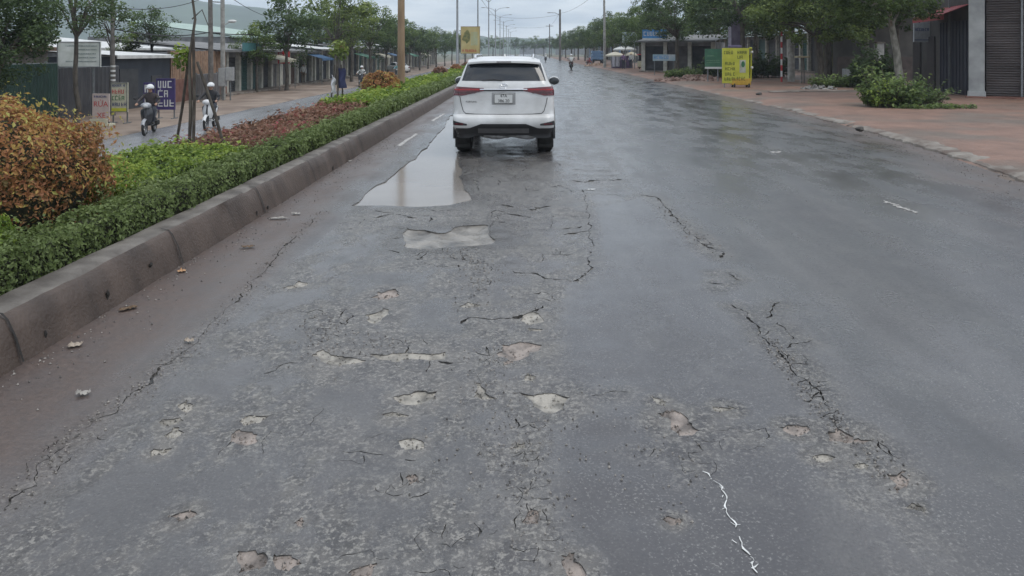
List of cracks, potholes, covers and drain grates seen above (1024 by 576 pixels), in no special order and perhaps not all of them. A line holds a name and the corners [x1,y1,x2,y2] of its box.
crack [218,409,384,464]
pothole [658,409,700,436]
crack [345,163,622,292]
crack [303,309,354,342]
crack [375,459,439,499]
pothole [231,429,258,446]
pothole [393,390,437,405]
pothole [780,424,810,436]
pothole [519,392,570,414]
pothole [313,349,366,367]
pothole [237,550,268,573]
pothole [497,342,542,361]
